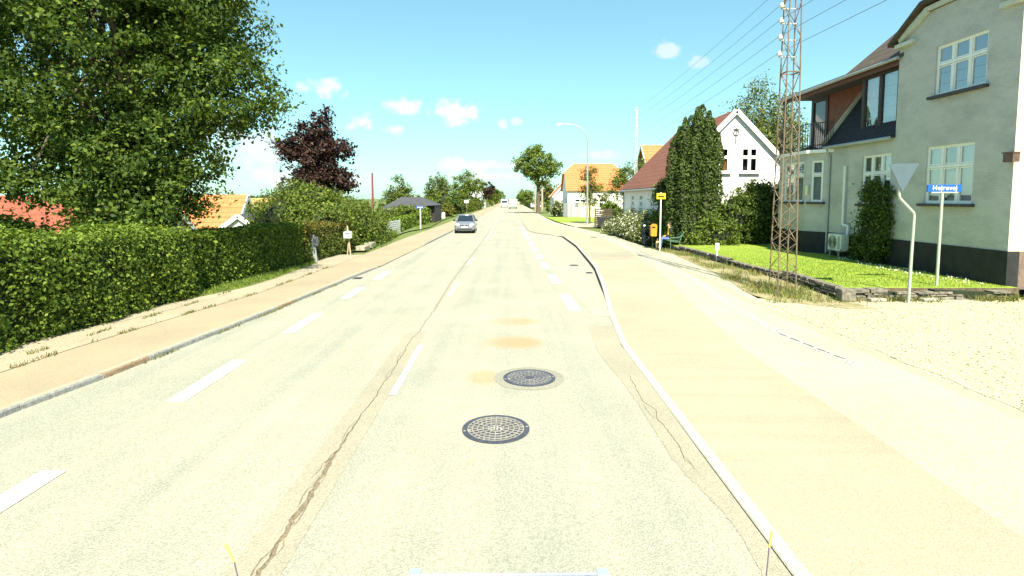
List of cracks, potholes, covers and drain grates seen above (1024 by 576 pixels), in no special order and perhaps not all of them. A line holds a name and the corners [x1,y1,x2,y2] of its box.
manhole cover [494,367,564,390]
manhole cover [462,415,529,444]
crack [630,377,792,576]
crack [250,224,494,576]
